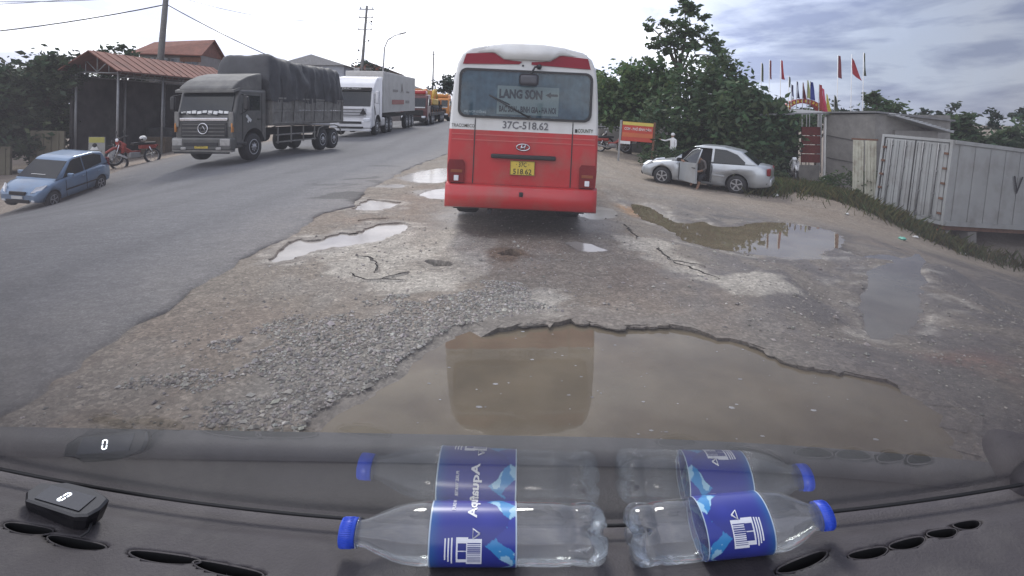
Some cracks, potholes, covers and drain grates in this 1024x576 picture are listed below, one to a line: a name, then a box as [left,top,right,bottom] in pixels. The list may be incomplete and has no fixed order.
crack [349,256,410,282]
pothole [257,221,419,265]
pothole [344,198,407,212]
pothole [489,247,532,259]
pothole [417,257,464,270]
pothole [280,306,908,443]
crack [620,224,719,279]
